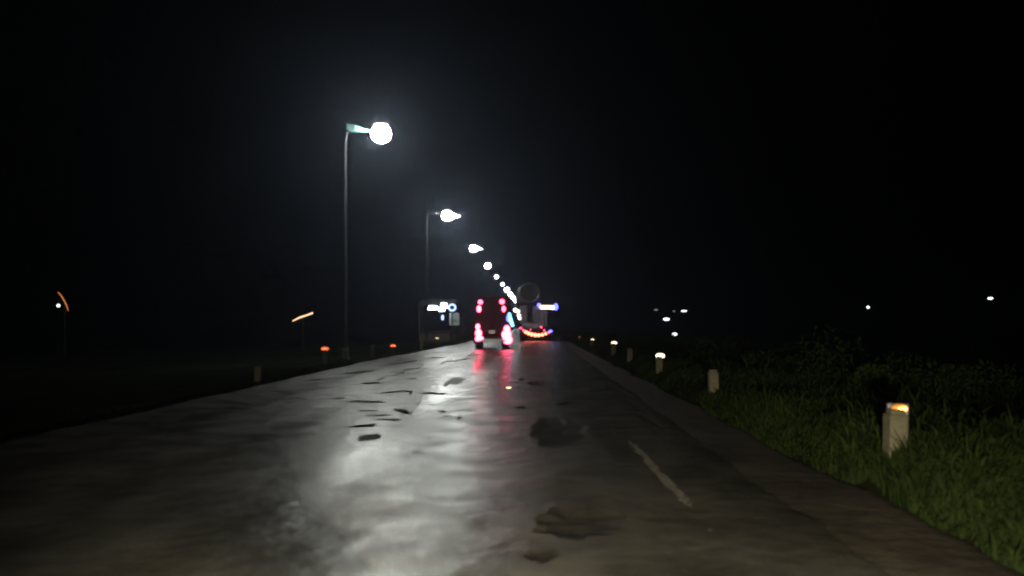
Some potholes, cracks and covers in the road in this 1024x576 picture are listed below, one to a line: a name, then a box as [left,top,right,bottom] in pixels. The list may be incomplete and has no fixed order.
pothole [346,433,393,444]
pothole [519,416,606,451]
pothole [511,502,643,546]
